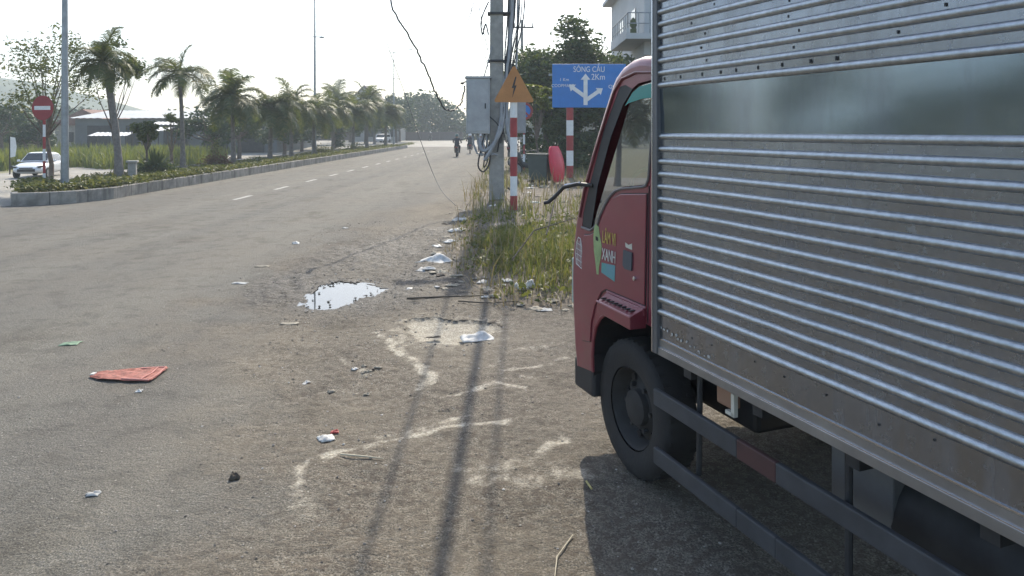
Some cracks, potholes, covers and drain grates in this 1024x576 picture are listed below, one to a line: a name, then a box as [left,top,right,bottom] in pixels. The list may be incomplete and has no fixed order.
pothole [380,313,504,348]
pothole [293,279,402,313]
